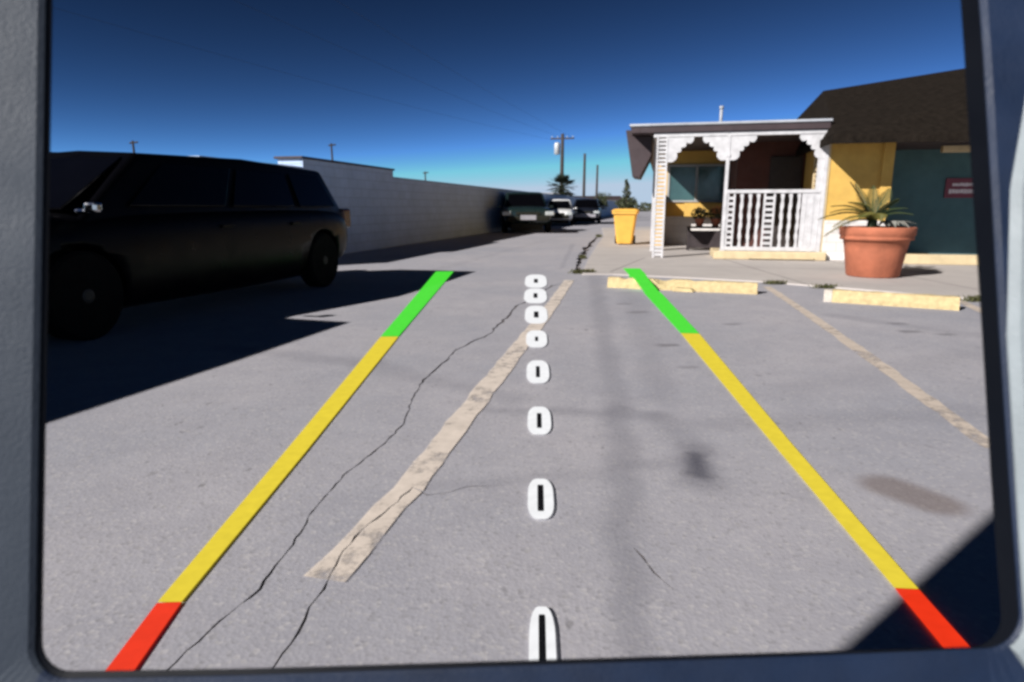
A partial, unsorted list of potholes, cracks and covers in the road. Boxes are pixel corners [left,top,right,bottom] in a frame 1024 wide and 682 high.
crack [167,237,597,670]
